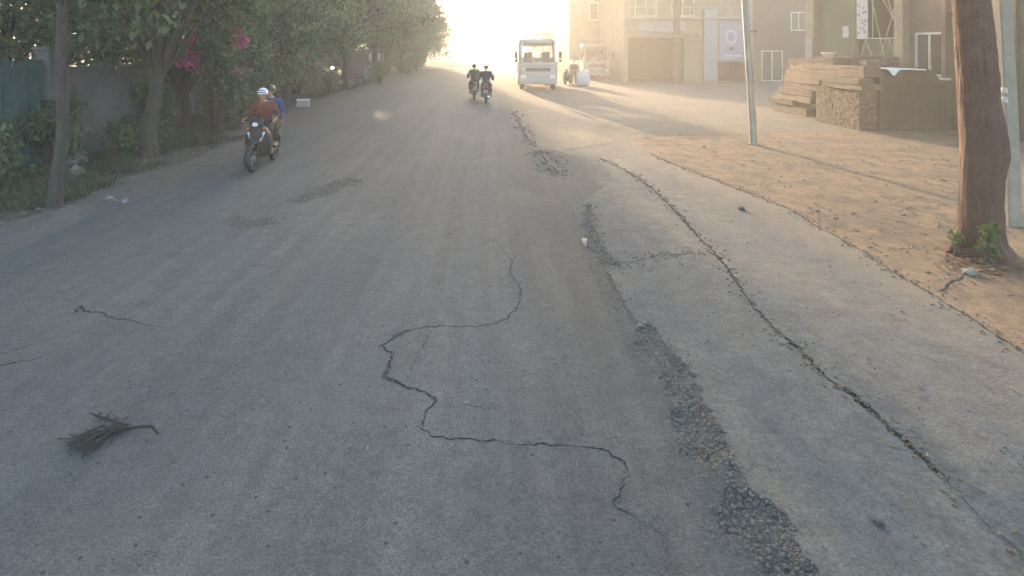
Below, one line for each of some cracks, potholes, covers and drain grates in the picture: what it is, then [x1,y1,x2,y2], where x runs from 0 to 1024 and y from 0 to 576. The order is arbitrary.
pothole [625,320,743,475]
crack [572,122,1024,361]
crack [0,337,70,366]
pothole [689,466,827,576]
crack [61,305,162,330]
pothole [573,202,624,269]
crack [378,233,683,576]
pothole [525,149,573,179]
